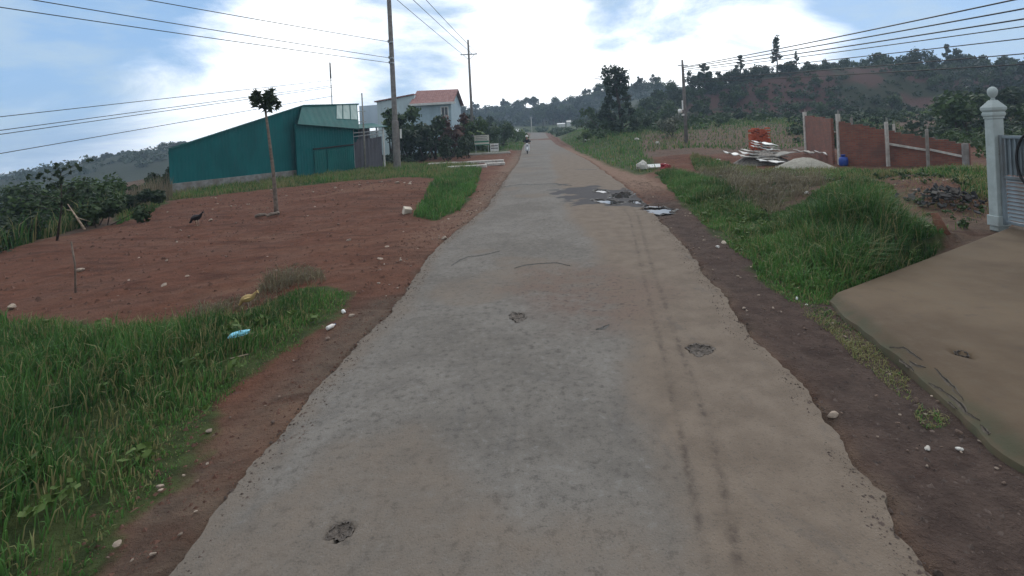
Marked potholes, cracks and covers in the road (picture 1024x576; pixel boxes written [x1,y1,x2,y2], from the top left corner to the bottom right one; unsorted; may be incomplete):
pothole [685,343,716,357]
pothole [607,191,636,199]
crack [889,347,991,435]
pothole [509,312,526,323]
pothole [642,207,679,216]
pothole [324,521,354,542]
